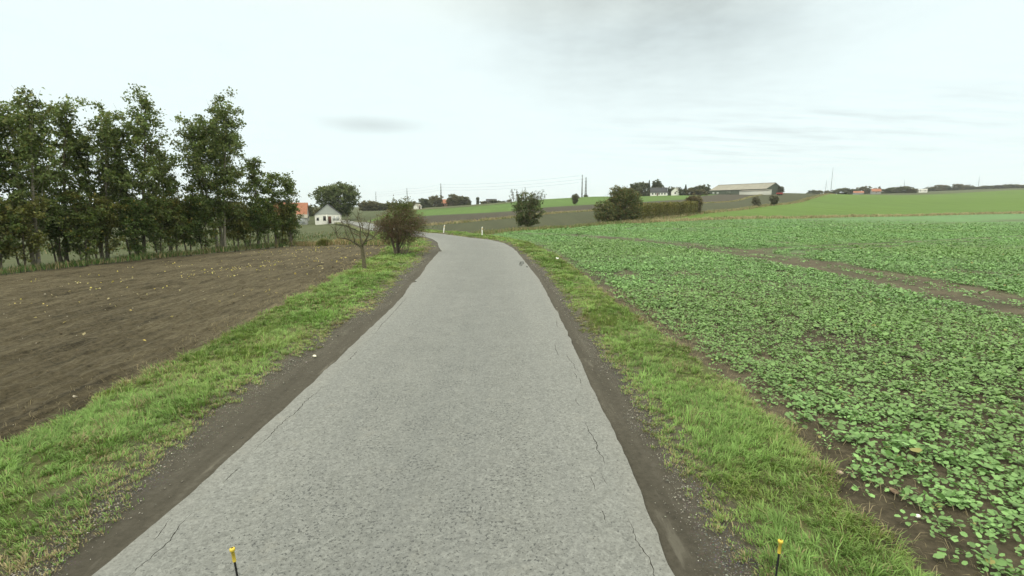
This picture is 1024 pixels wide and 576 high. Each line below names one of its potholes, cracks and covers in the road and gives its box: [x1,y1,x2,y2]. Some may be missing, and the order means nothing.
crack [131,513,192,575]
